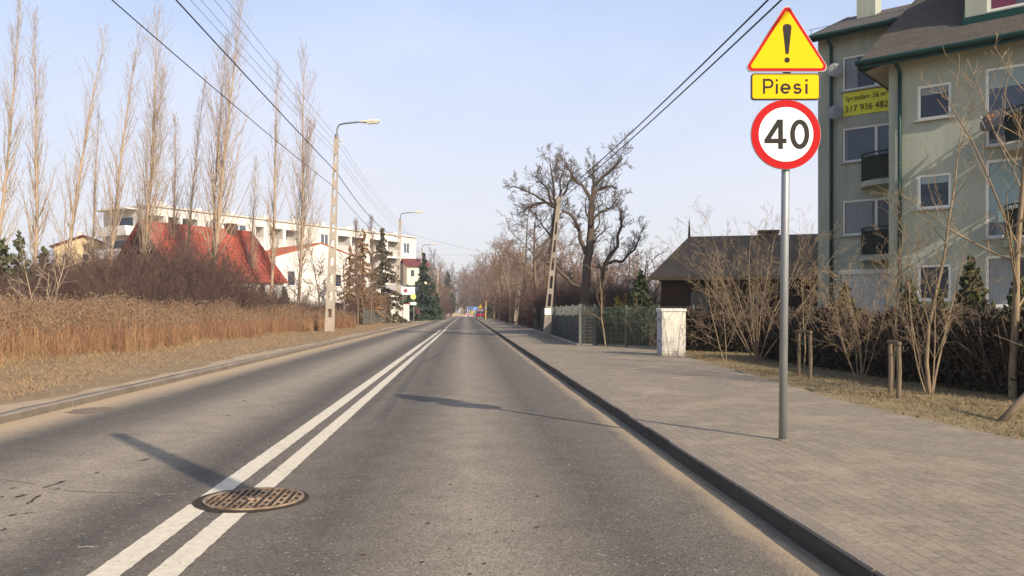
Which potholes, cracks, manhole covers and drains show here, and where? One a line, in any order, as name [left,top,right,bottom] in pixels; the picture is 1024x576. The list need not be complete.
crack [0,479,97,531]
manhole cover [192,487,310,513]
